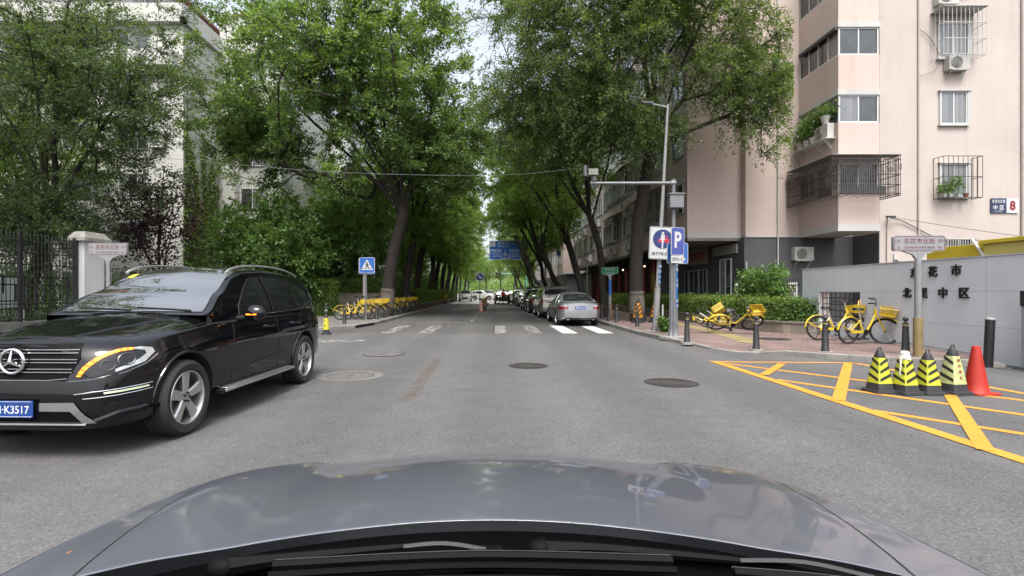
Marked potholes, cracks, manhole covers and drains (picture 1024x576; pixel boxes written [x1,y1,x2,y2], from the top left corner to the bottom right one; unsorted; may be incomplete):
manhole cover [315,371,384,382]
manhole cover [643,378,699,387]
